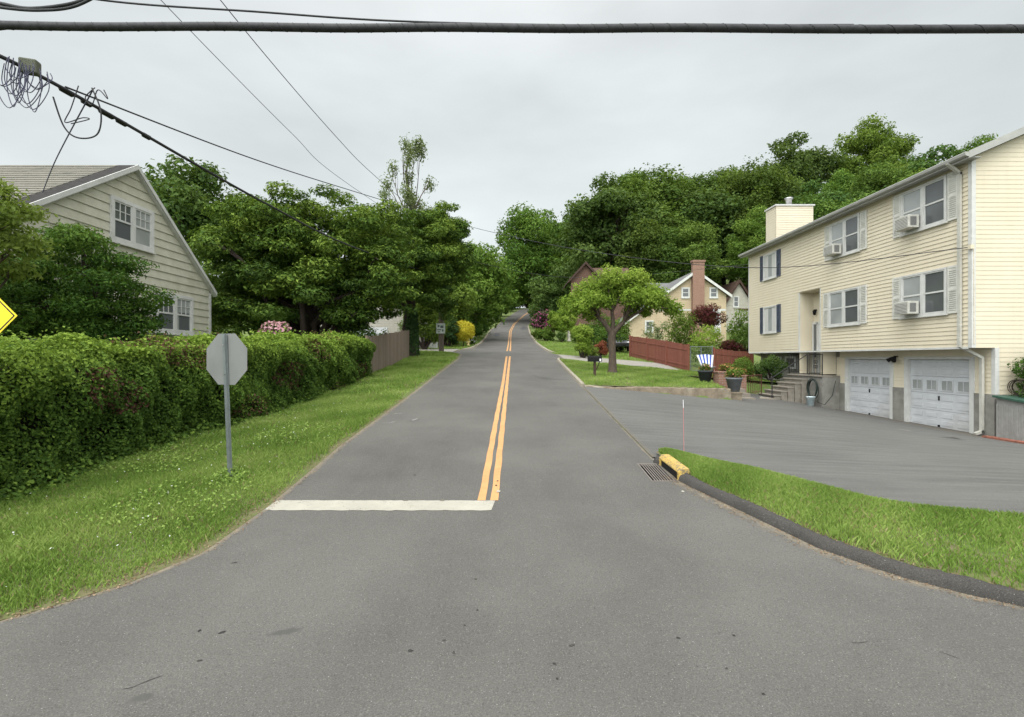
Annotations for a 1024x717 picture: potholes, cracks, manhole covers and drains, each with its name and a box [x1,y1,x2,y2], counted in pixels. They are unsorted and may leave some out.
drain grate [637,463,674,481]
